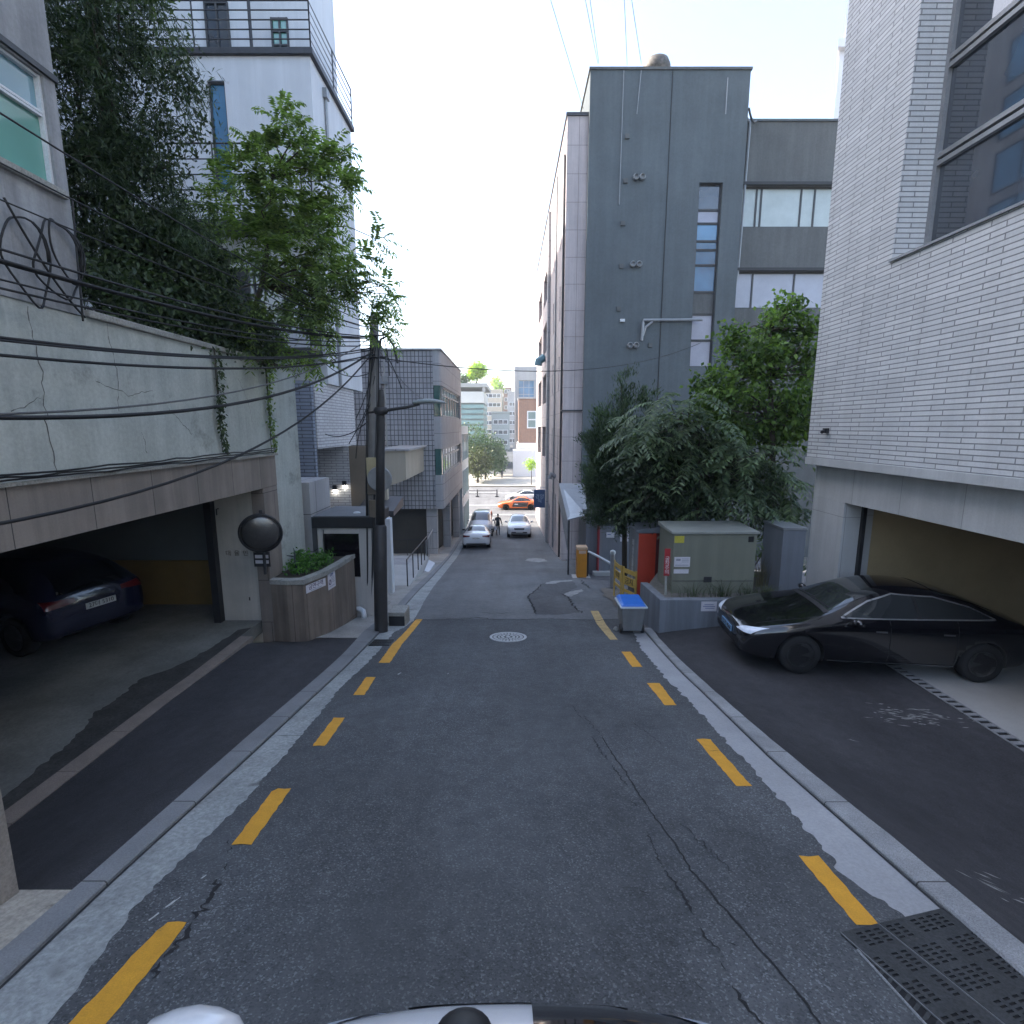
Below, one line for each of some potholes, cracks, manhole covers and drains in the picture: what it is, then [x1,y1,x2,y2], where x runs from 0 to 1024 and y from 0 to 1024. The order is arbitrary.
crack [572,705,821,1024]
drain grate [840,908,1024,1024]
manhole cover [490,632,527,642]
crack [150,840,233,982]
